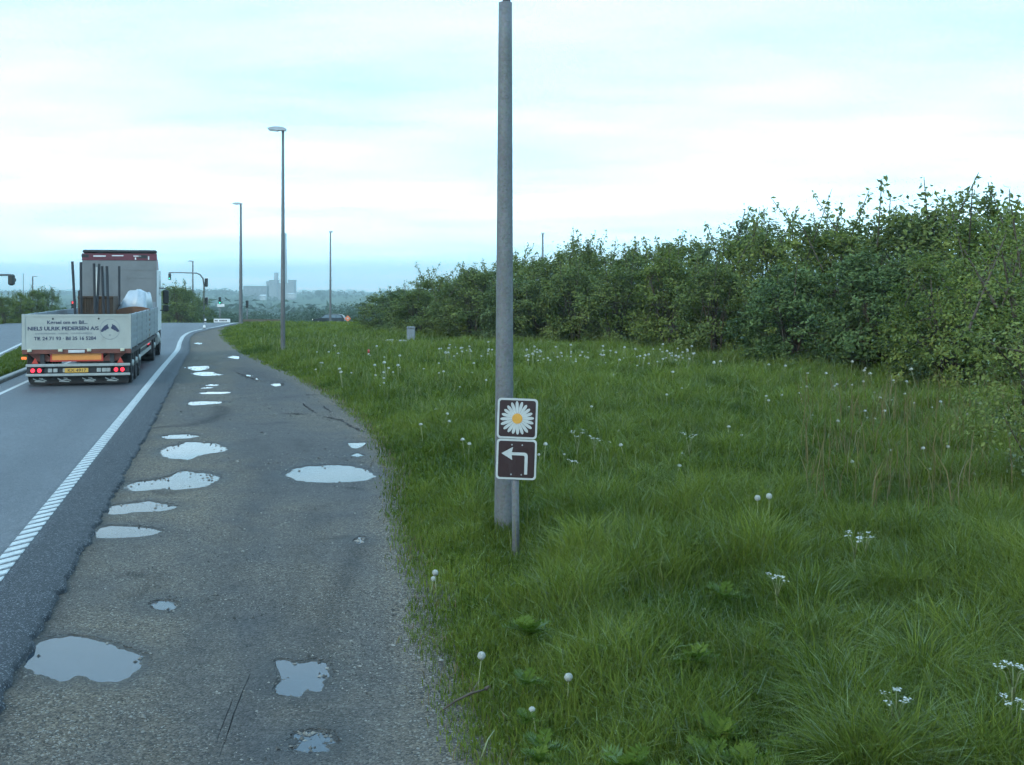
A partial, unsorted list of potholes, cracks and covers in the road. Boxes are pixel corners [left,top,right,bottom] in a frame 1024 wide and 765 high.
pothole [286,728,341,753]
pothole [148,598,181,611]
pothole [93,524,165,539]
pothole [19,633,154,684]
pothole [106,500,180,515]
crack [290,394,365,432]
pothole [120,470,223,491]
pothole [156,441,234,460]
pothole [272,658,336,697]
pothole [280,464,381,483]
